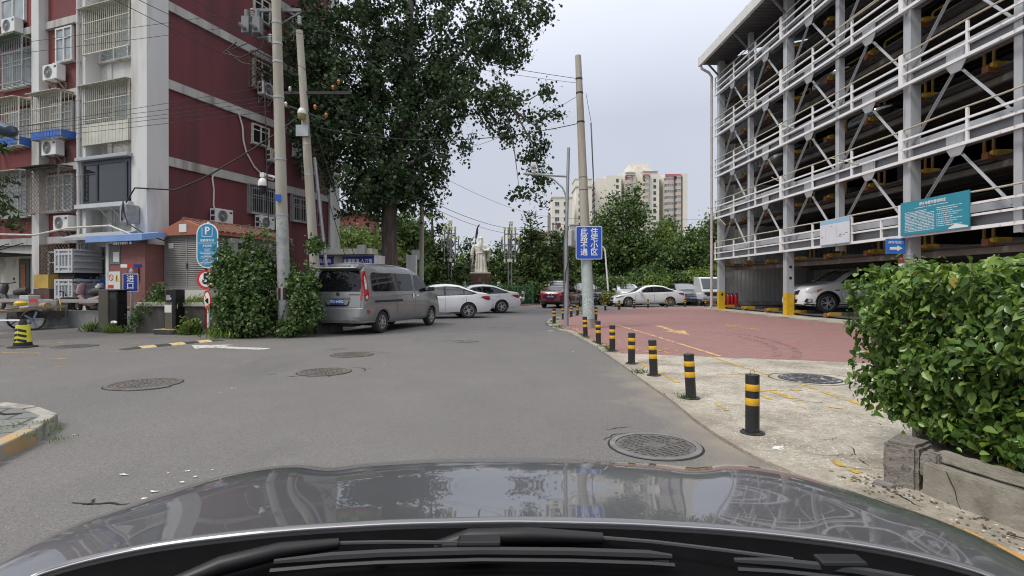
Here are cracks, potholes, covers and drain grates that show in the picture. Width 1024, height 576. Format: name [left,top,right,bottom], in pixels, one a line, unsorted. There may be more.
manhole cover [101,378,184,391]
manhole cover [296,367,352,376]
manhole cover [768,373,857,386]
manhole cover [608,432,705,461]
